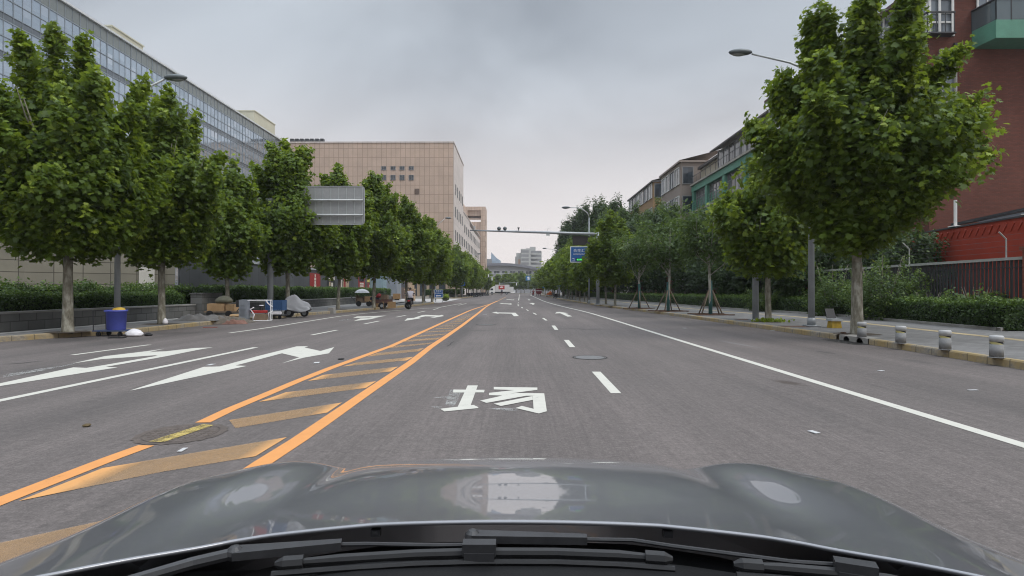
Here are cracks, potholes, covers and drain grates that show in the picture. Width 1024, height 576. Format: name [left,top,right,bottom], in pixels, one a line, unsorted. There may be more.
manhole cover [131,423,228,445]
